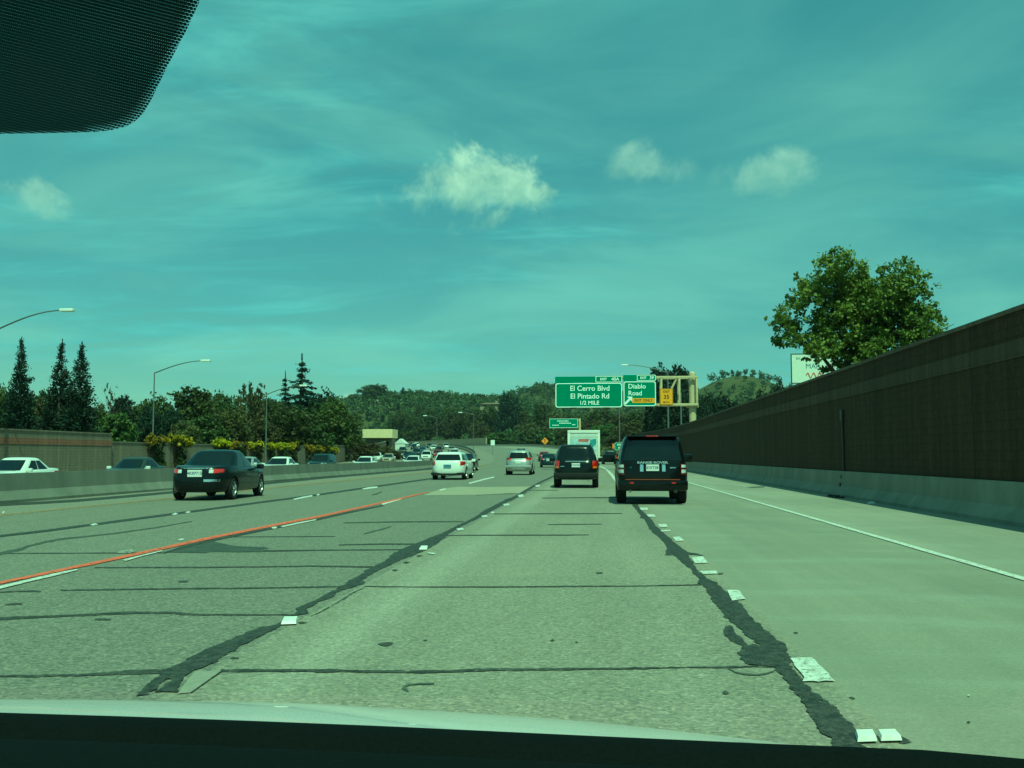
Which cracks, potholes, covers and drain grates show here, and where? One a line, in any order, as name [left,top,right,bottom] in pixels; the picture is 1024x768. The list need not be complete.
crack [402,683,434,691]
